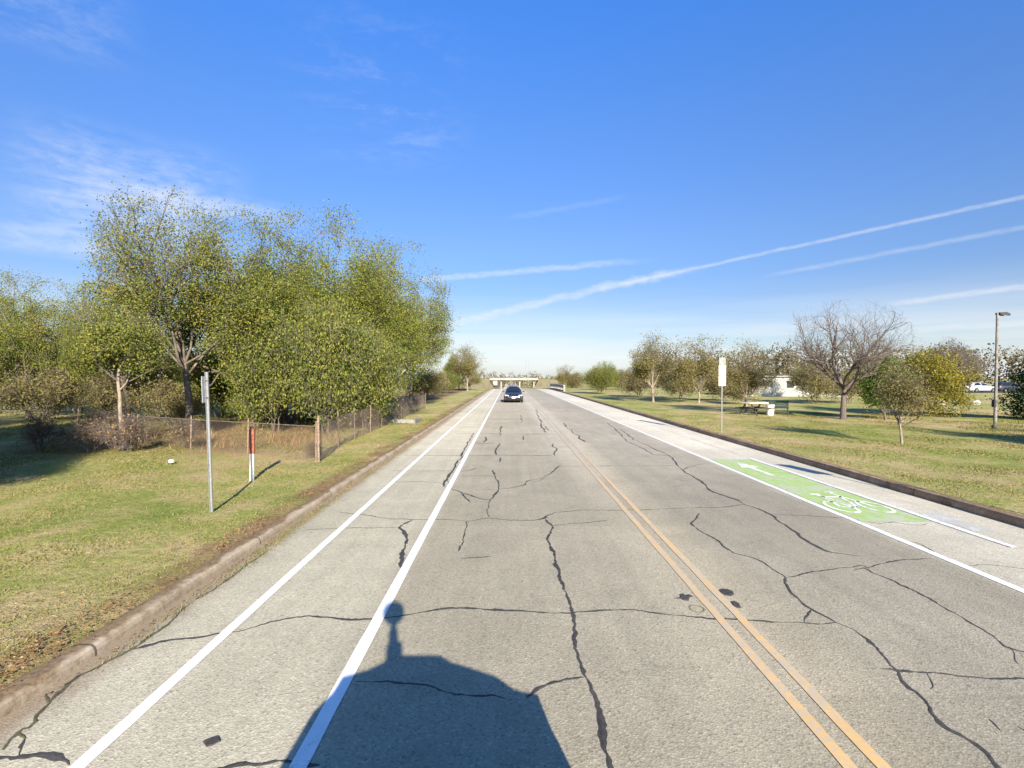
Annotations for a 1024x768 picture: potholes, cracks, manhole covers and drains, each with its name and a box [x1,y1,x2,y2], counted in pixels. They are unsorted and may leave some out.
crack [0,411,1024,768]
